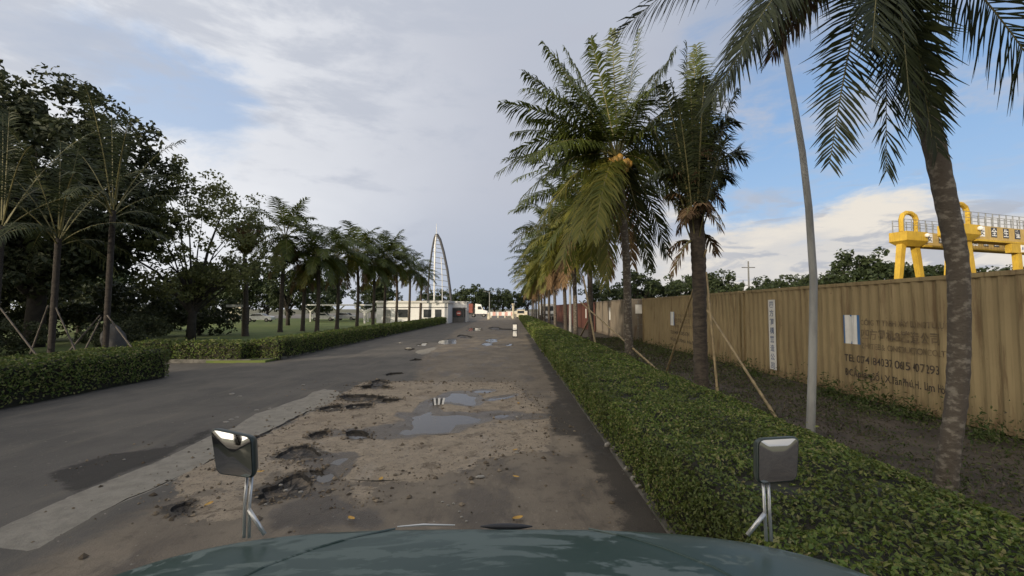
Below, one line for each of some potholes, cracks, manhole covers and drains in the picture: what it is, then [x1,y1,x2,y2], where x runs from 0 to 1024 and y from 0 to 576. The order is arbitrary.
pothole [361,379,389,389]
pothole [340,394,400,403]
pothole [170,502,191,515]
pothole [257,472,313,502]
pothole [275,445,322,460]
